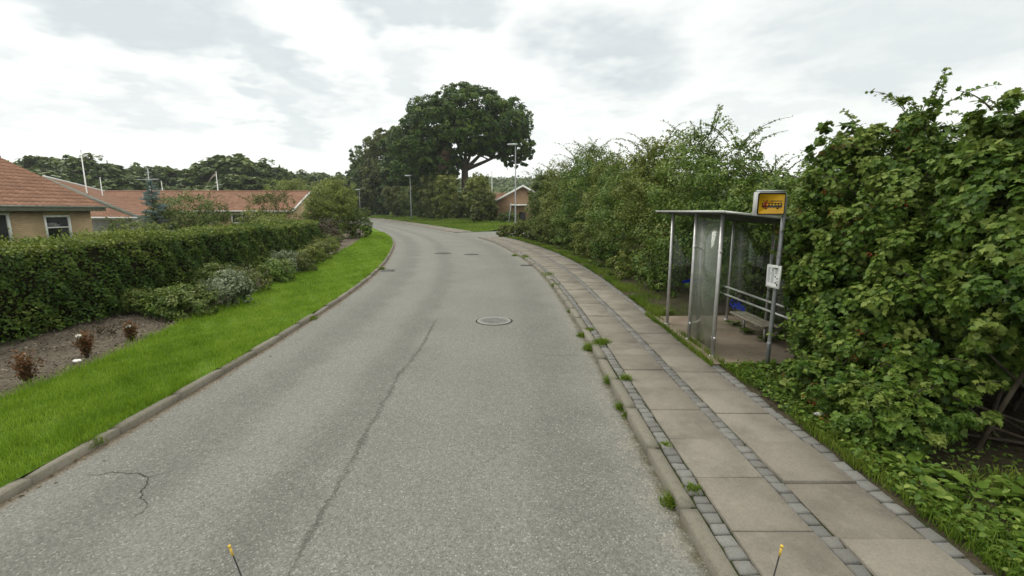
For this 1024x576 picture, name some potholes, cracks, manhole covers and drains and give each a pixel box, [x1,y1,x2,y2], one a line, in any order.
manhole cover [476,317,513,325]
crack [84,471,157,517]
